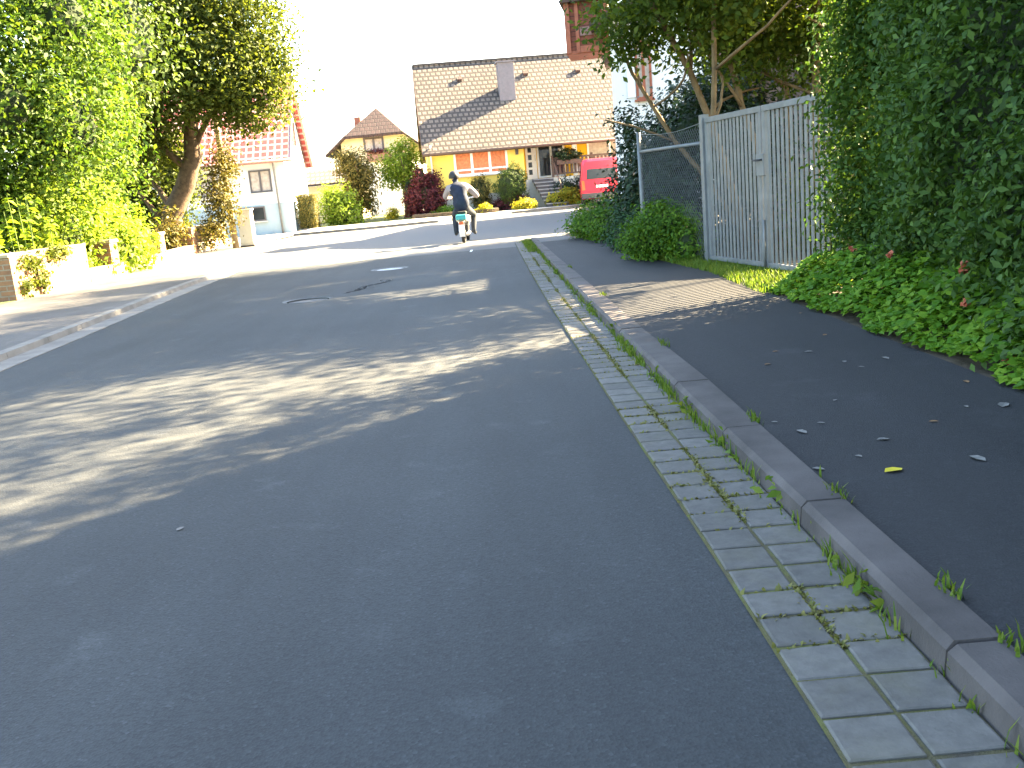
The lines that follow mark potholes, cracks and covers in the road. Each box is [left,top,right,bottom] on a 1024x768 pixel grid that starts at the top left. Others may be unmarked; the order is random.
crack [343,278,411,294]
manhole cover [282,296,333,304]
